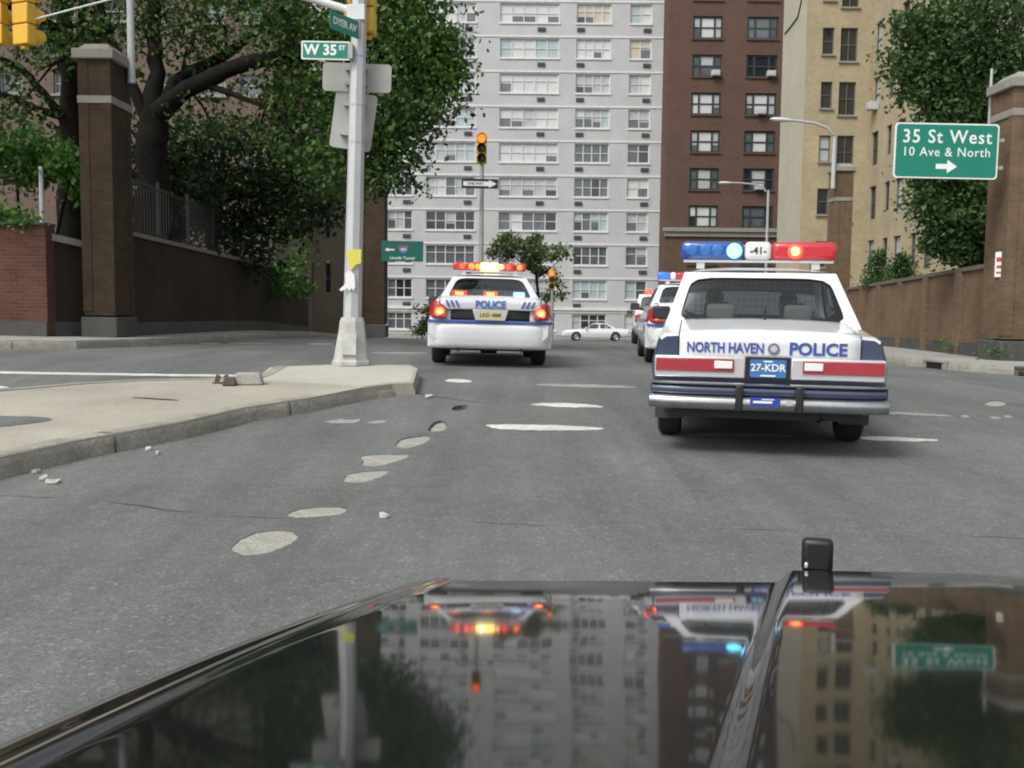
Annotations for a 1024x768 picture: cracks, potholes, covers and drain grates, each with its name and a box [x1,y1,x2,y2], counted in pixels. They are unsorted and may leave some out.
crack [105,501,194,513]
pothole [428,420,447,431]
